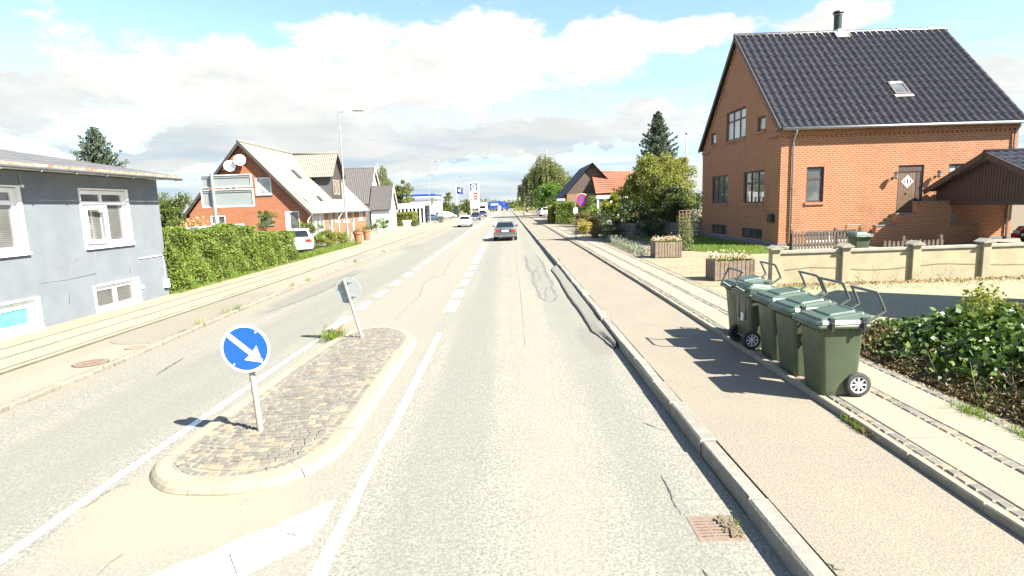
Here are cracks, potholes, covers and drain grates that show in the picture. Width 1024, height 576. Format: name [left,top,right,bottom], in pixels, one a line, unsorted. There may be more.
manhole cover [71,359,109,368]
drain grate [686,515,748,542]
